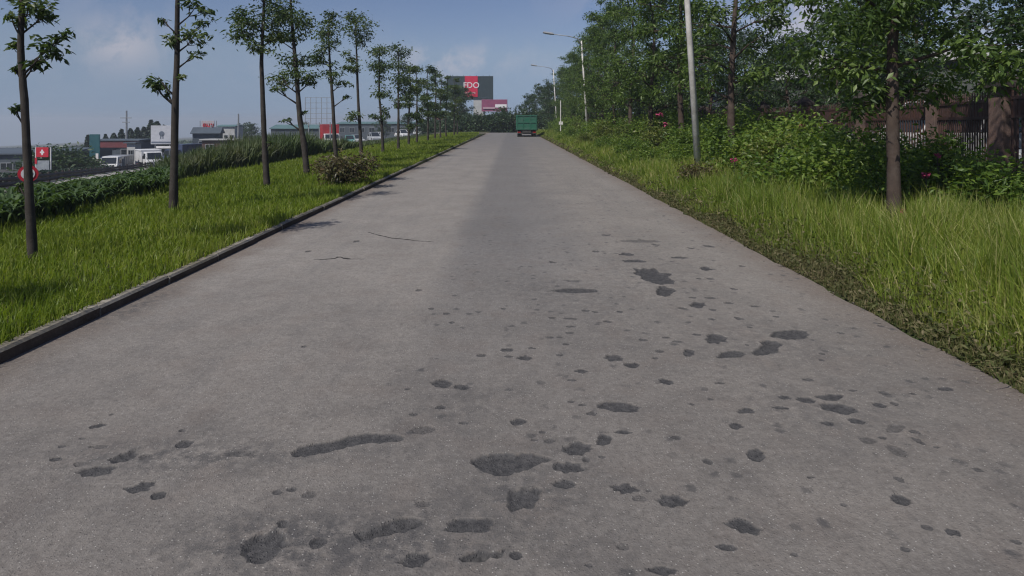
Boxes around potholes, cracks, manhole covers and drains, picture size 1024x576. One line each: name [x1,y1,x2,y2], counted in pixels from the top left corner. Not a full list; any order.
pothole [596,400,643,413]
pothole [633,267,676,285]
pothole [75,465,119,477]
pothole [240,529,290,564]
pothole [290,432,406,458]
pothole [506,485,544,512]
pothole [442,517,496,533]
pothole [123,480,158,494]
pothole [470,451,555,476]
pothole [353,516,426,543]
pothole [750,339,785,356]
pothole [769,329,811,340]
